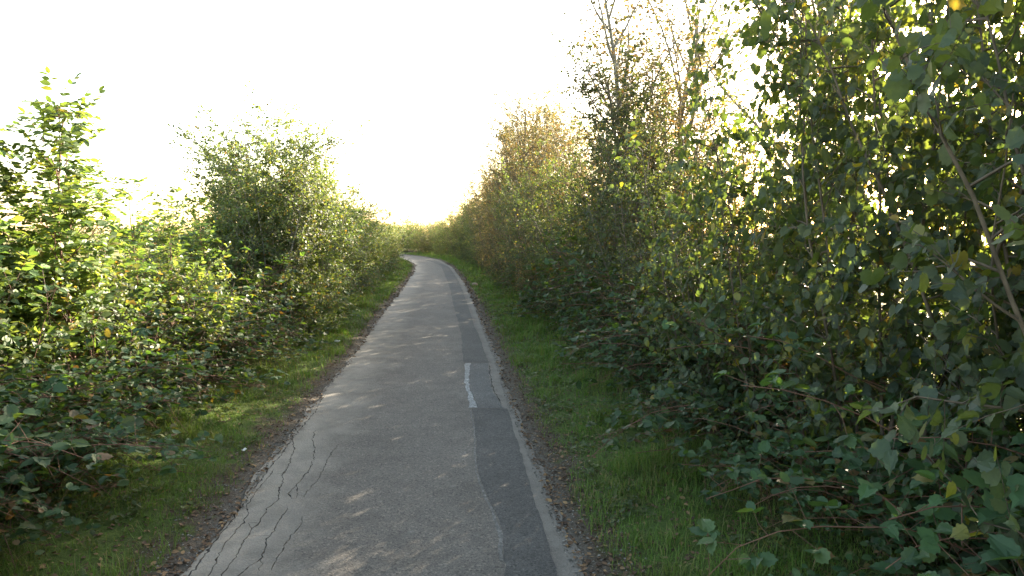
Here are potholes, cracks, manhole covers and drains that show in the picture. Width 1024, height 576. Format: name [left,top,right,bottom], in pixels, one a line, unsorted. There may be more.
crack [188,394,339,576]
